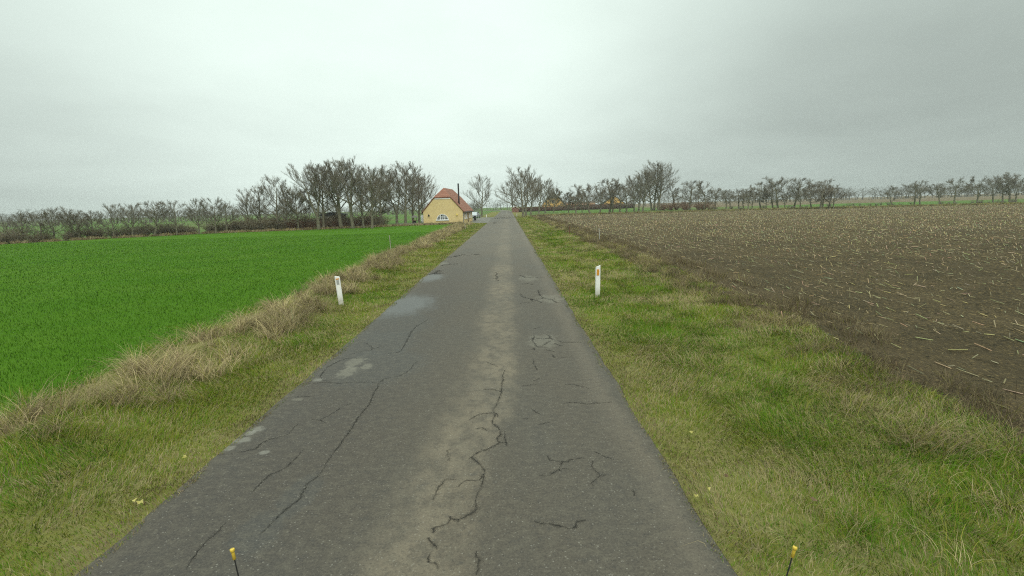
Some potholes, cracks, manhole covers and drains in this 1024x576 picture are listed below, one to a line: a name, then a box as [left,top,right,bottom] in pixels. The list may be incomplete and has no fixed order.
crack [276,334,412,519]
crack [428,362,507,564]
